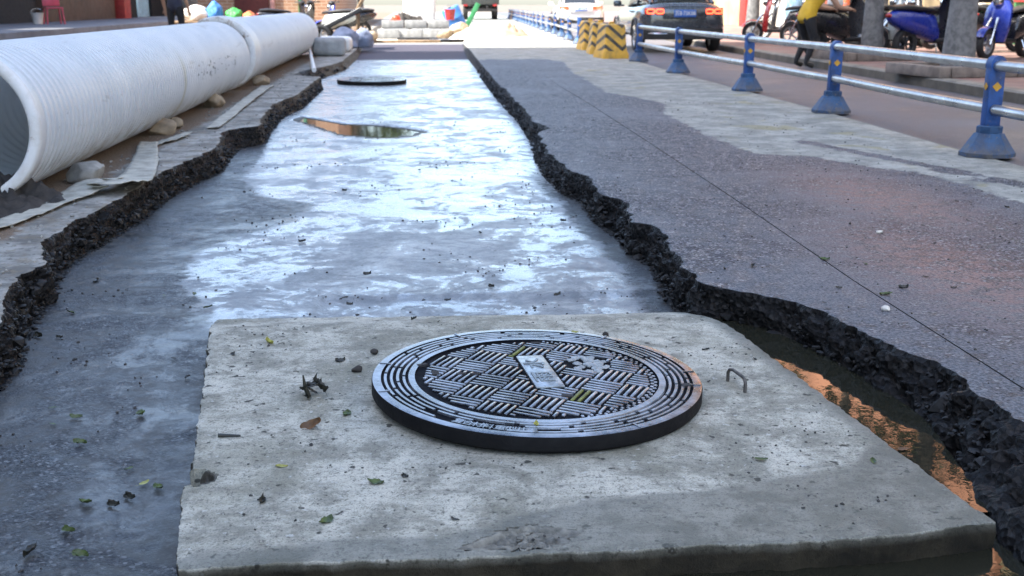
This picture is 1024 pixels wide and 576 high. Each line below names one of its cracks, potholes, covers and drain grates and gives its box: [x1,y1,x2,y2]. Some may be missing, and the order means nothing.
pothole [293,117,427,138]
manhole cover [337,76,406,86]
manhole cover [372,329,703,453]
